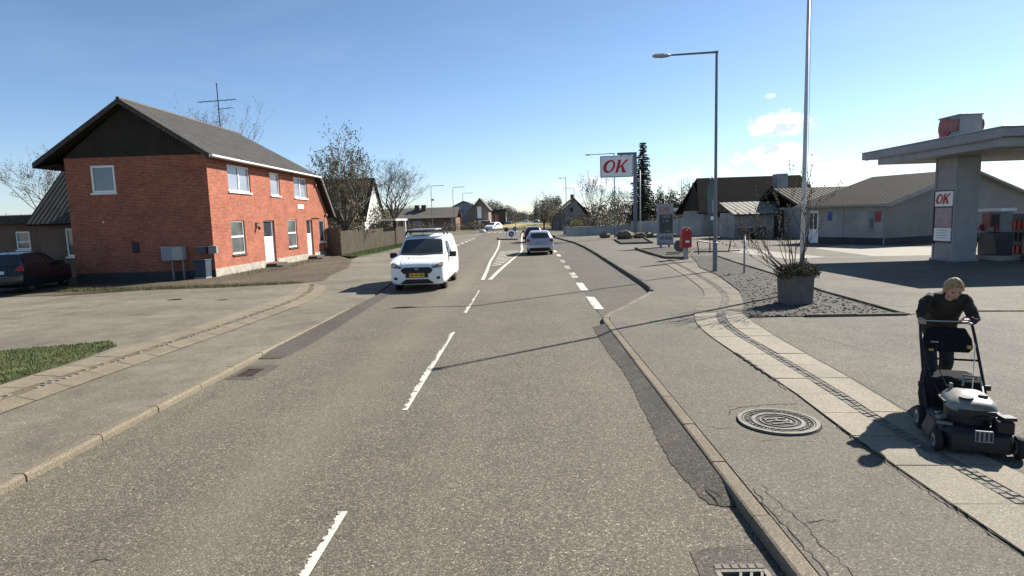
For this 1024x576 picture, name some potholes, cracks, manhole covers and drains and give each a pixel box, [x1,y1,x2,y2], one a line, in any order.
crack [753,485,853,576]
drain grate [232,368,267,377]
manhole cover [736,408,823,436]
drain grate [713,563,772,576]
